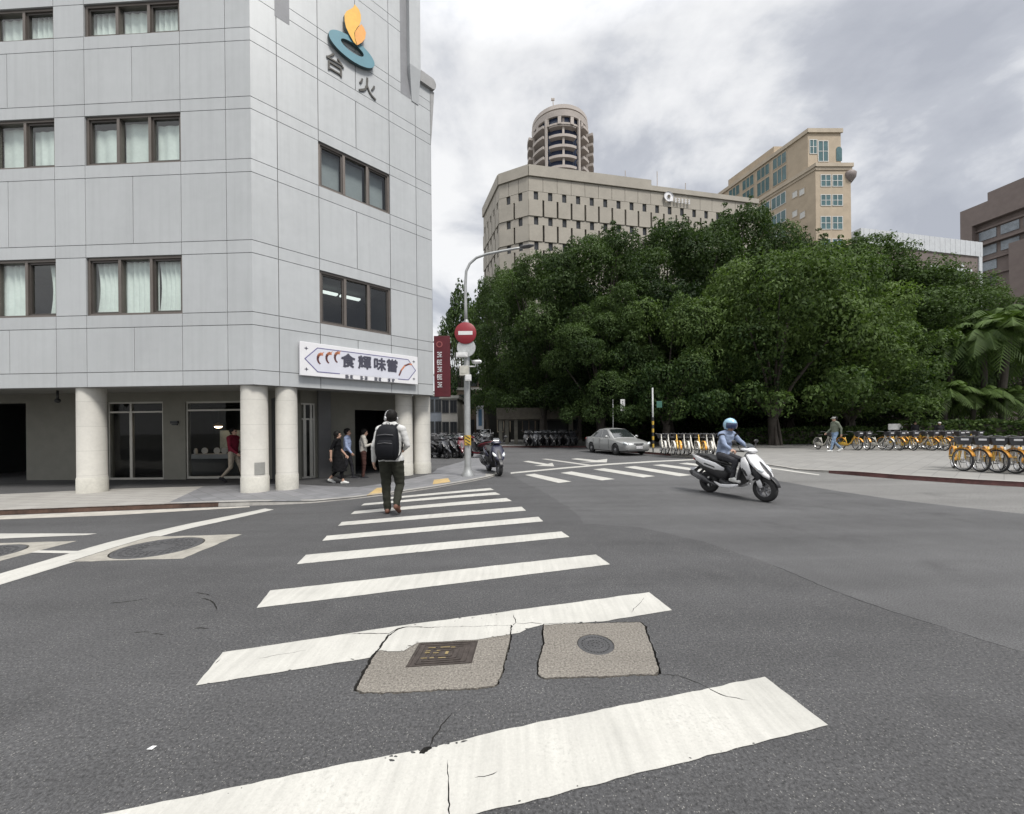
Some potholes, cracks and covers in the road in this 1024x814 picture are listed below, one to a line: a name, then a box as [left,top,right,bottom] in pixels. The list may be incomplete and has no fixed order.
crack [430,712,453,814]
manhole cover [70,534,241,562]
